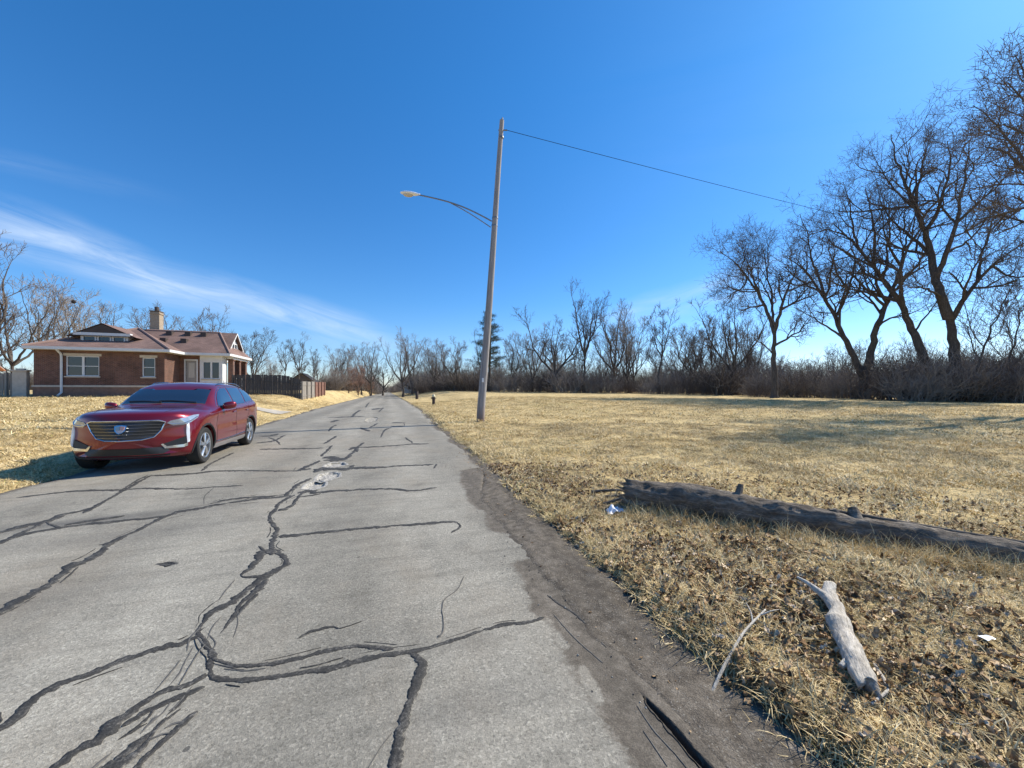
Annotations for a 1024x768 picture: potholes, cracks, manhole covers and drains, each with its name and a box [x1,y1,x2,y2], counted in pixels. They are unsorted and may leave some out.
crack [17,453,437,498]
crack [278,521,461,538]
crack [297,621,362,639]
crack [438,577,464,637]
crack [328,403,437,469]
pothole [301,479,328,490]
crack [257,433,320,450]
pothole [313,472,342,483]
